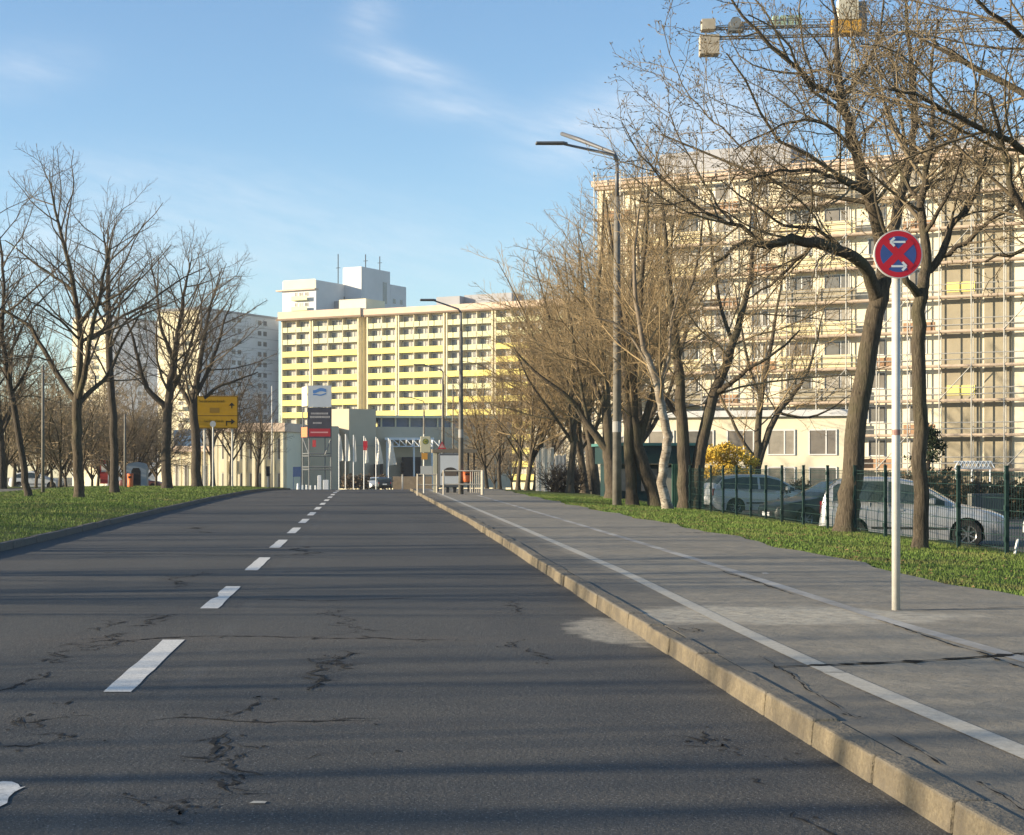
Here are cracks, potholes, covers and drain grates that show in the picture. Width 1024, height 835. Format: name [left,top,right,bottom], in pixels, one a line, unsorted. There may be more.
crack [496,600,552,664]
crack [116,696,377,825]
crack [0,597,466,751]
crack [685,726,740,755]
